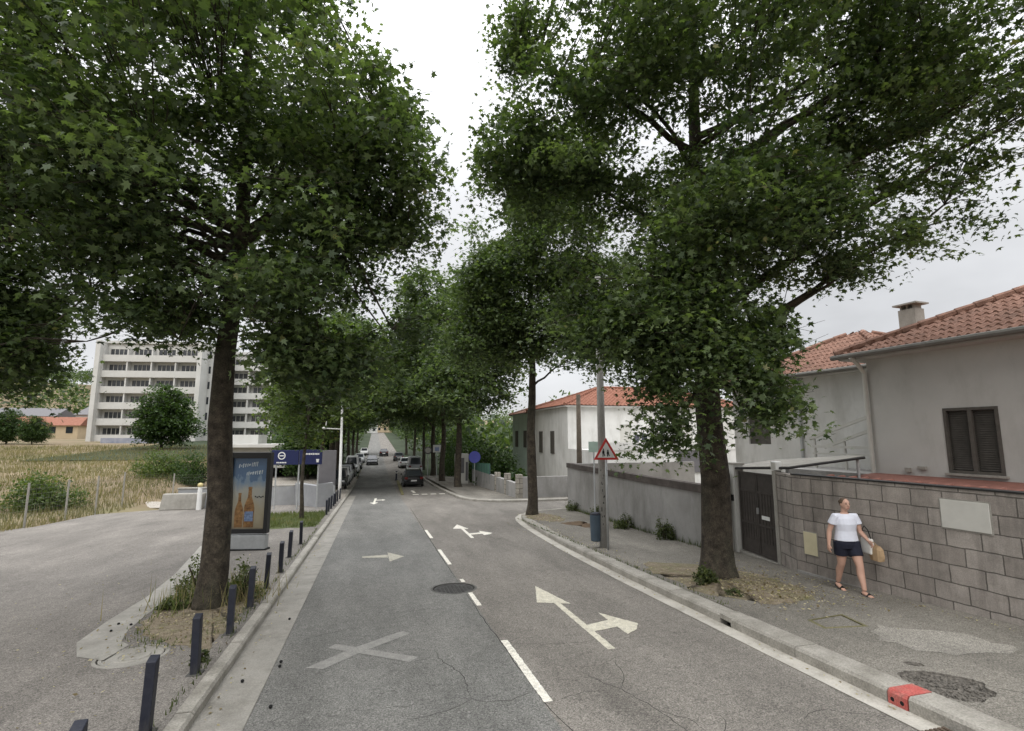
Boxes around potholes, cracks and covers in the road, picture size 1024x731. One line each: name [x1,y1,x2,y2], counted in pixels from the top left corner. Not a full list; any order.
crack [538,656,698,731]
manhole cover [430,583,477,594]
manhole cover [91,644,170,669]
manhole cover [808,614,867,629]
crack [382,652,528,719]
